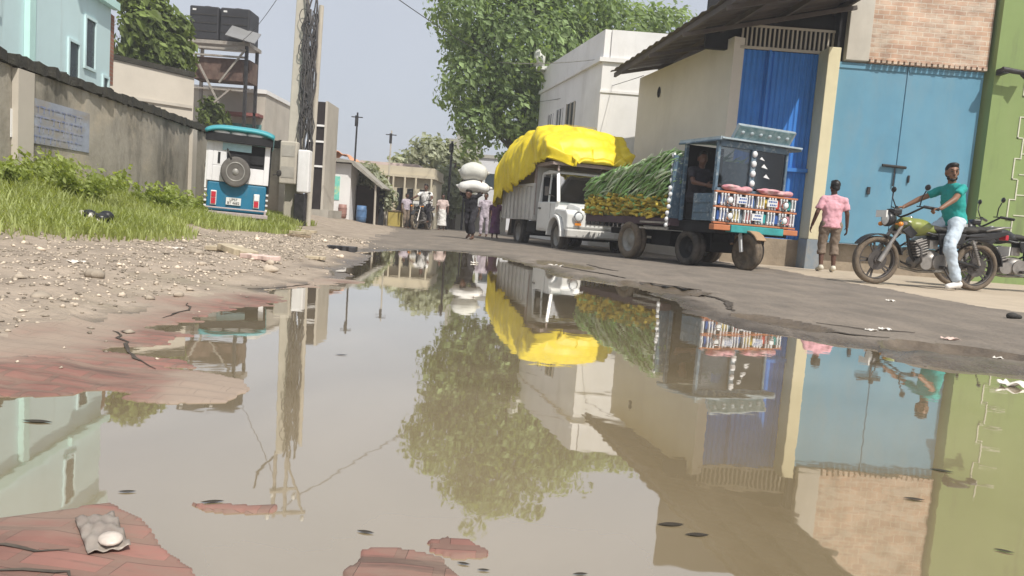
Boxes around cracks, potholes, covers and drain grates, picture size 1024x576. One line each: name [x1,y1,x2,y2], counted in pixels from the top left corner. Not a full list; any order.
pothole [0,250,1024,576]
crack [642,282,734,311]
crack [0,568,71,576]
crack [764,322,915,338]
crack [115,331,156,369]
